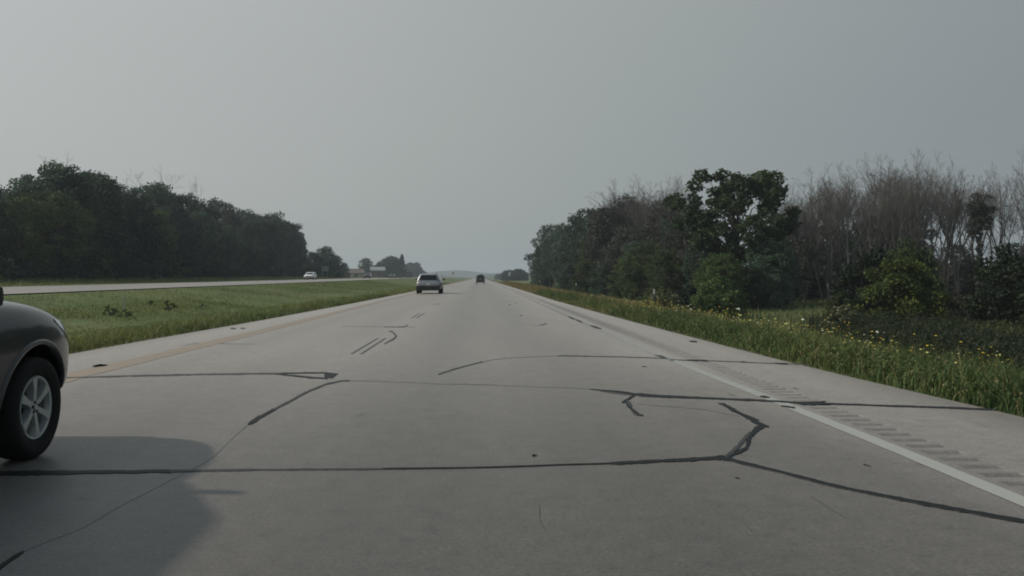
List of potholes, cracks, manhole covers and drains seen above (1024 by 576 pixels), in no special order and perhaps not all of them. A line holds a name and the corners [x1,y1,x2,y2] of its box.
crack [341,325,414,344]
crack [0,355,996,570]
